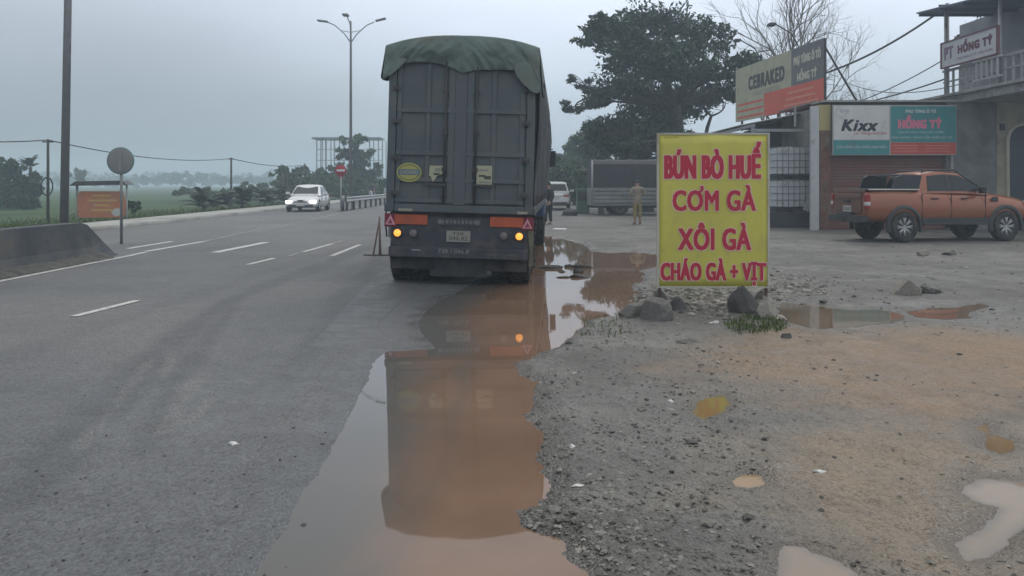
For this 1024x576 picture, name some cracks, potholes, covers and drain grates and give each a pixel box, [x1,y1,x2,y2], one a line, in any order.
pothole [235,235,657,576]
